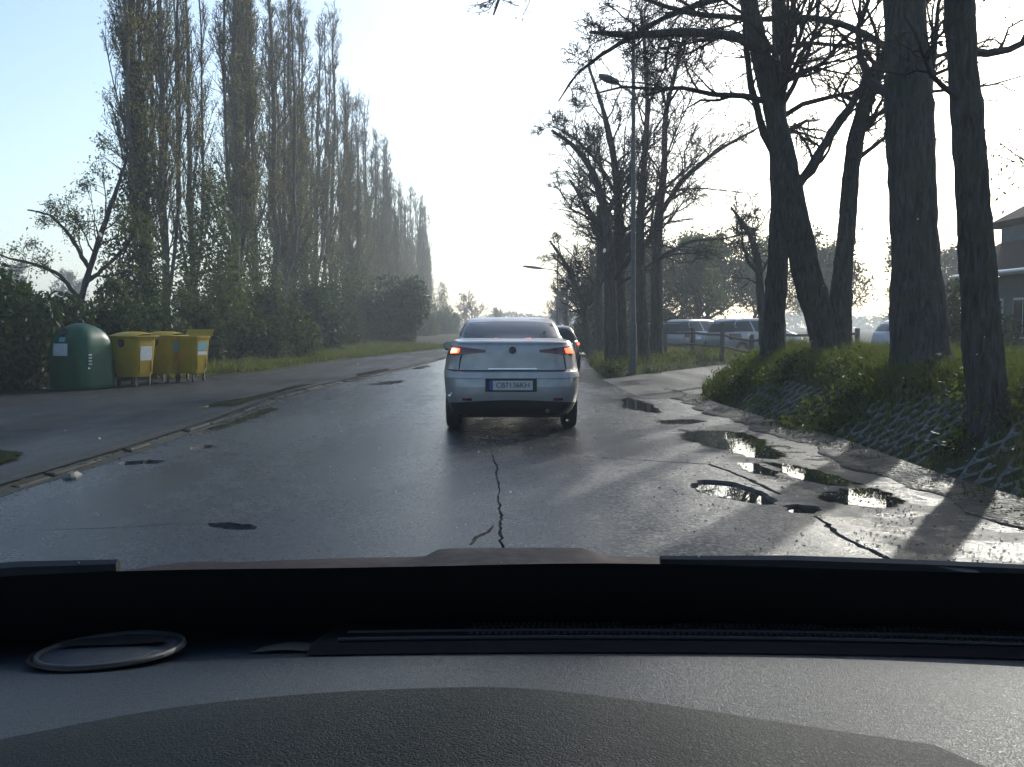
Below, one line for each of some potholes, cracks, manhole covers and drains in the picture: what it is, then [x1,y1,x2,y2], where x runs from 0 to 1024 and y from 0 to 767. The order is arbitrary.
pothole [207,522,257,530]
pothole [687,480,778,505]
crack [813,516,891,559]
pothole [783,504,822,514]
crack [469,449,505,548]
